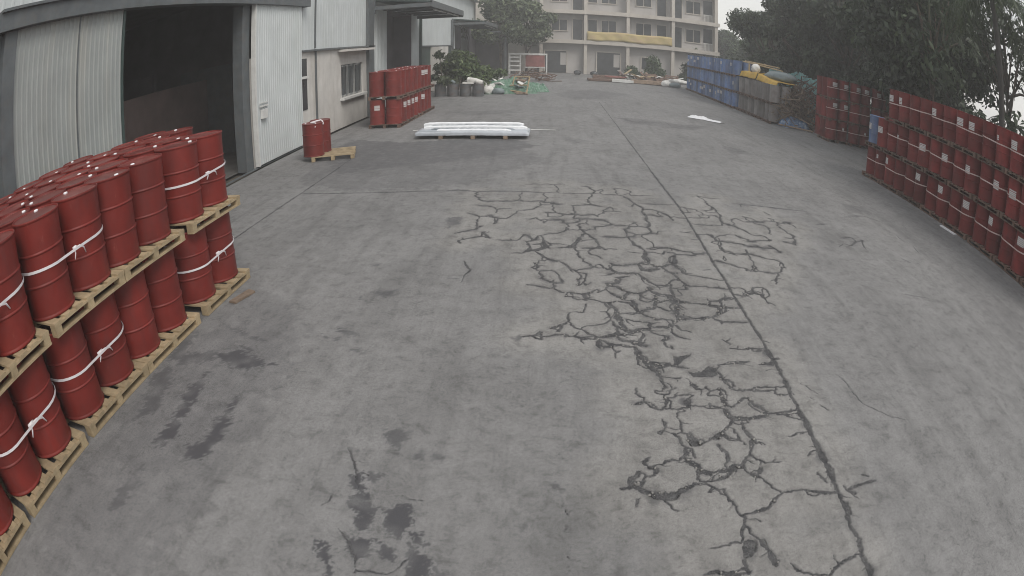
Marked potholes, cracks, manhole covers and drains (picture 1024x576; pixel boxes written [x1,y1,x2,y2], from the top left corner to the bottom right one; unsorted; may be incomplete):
crack [322,449,423,575]
crack [457,184,861,576]
